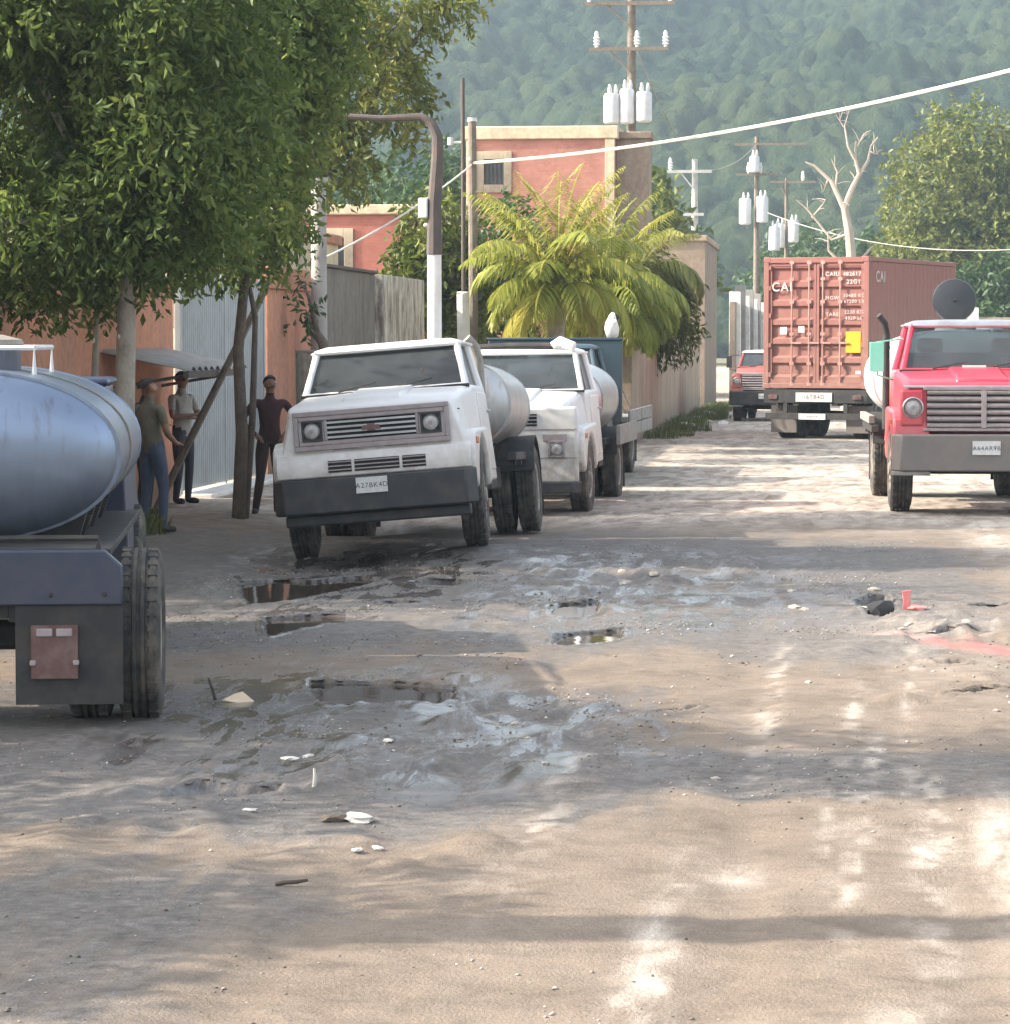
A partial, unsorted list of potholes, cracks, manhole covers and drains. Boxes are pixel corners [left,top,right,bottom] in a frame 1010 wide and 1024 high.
pothole [232,574,389,606]
pothole [254,612,385,639]
pothole [544,626,633,647]
pothole [297,676,470,707]
pothole [539,597,609,619]
